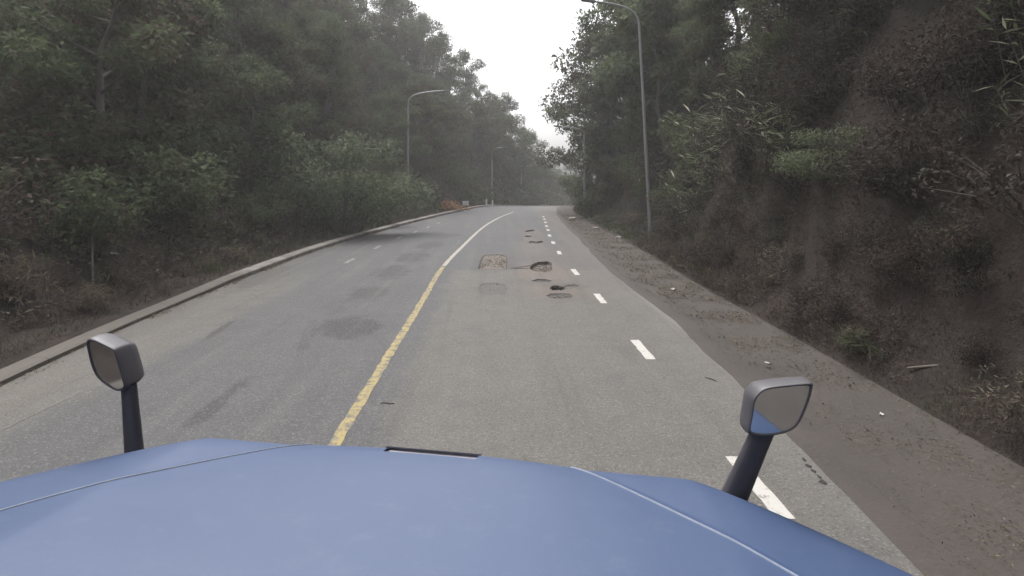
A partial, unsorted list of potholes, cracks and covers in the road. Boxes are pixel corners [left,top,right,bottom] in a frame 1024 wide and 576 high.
pothole [529,261,553,272]
